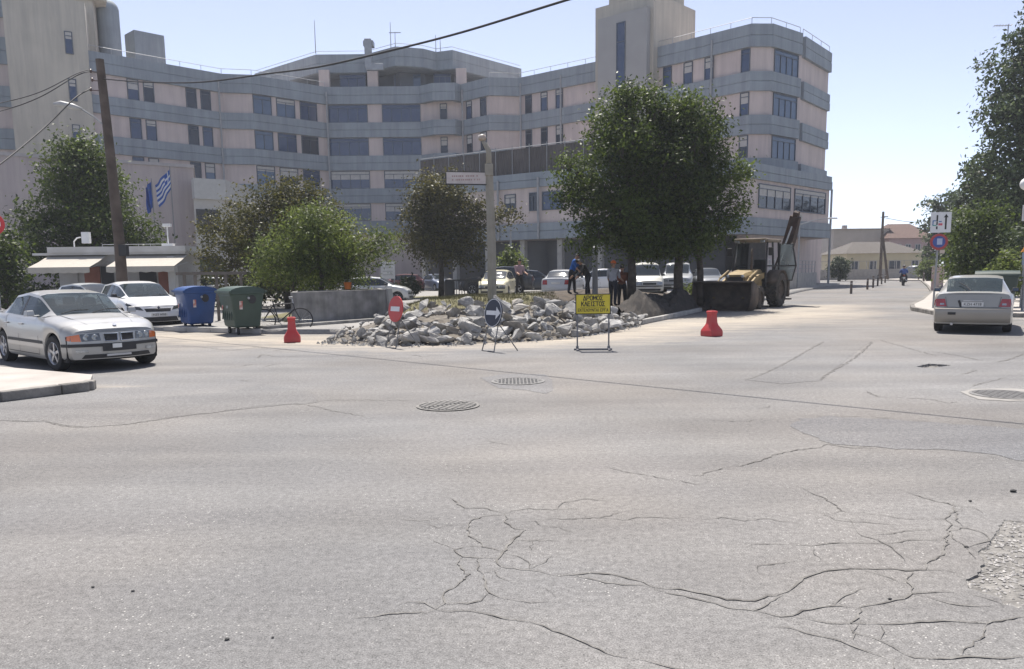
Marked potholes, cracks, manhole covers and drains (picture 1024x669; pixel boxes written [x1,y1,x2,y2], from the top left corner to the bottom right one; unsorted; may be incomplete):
crack [552,488,1024,669]
crack [363,496,685,669]
manhole cover [416,400,480,411]
crack [613,443,867,485]
crack [31,383,492,427]
manhole cover [491,377,545,385]
manhole cover [969,389,1024,399]
